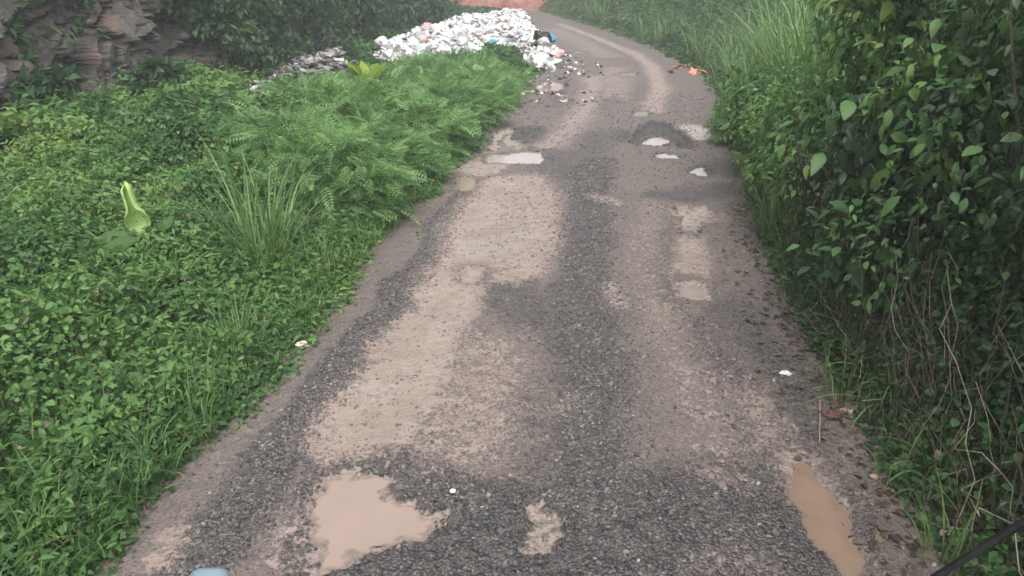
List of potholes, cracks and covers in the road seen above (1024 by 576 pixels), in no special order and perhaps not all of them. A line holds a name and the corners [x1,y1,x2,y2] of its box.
pothole [686,163,713,177]
pothole [288,462,455,576]
pothole [665,273,720,306]
pothole [510,492,572,557]
pothole [453,175,480,193]
pothole [764,440,890,576]
pothole [651,150,687,159]
pothole [483,149,549,165]
pothole [623,120,698,149]
